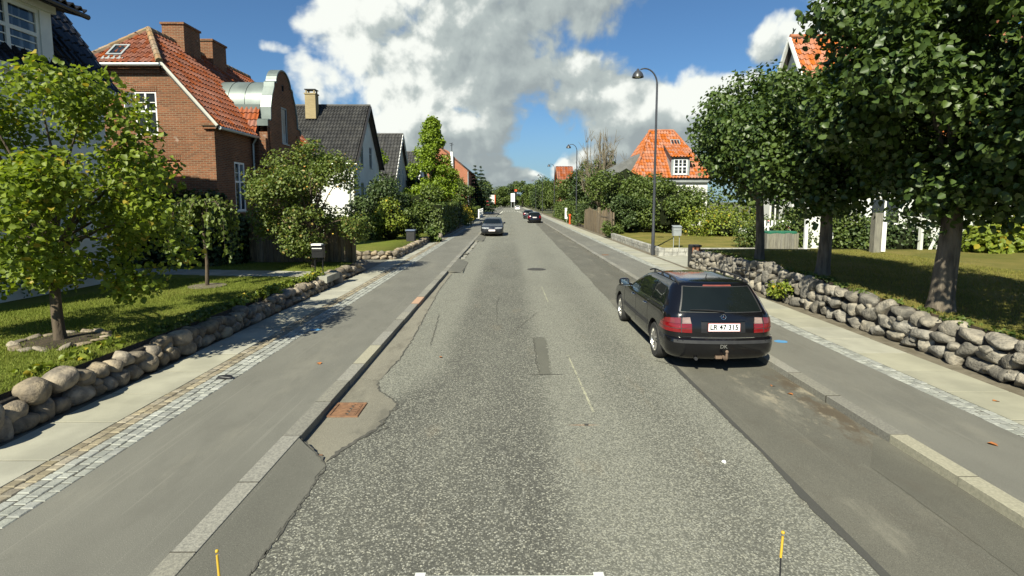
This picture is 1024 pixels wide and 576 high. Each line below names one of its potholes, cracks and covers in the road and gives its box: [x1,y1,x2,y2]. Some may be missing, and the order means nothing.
crack [517,313,545,375]
crack [247,278,459,576]
